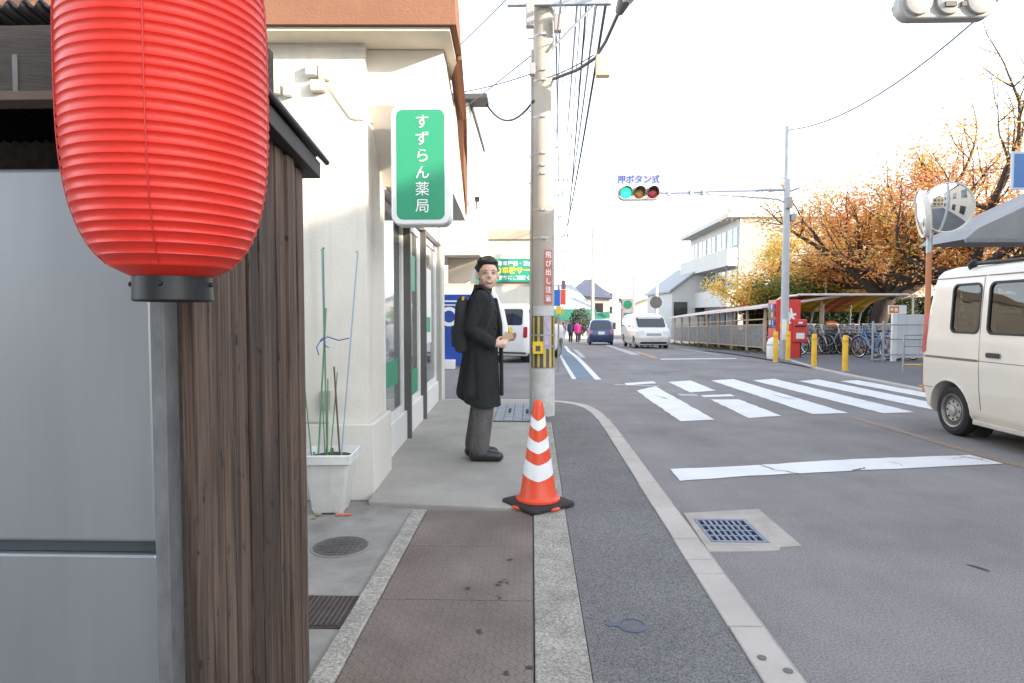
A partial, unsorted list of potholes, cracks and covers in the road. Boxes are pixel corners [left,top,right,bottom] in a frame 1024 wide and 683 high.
manhole cover [310,536,371,558]
utility cover [605,617,648,633]
drain grate [683,509,802,553]
drain grate [493,403,532,422]
